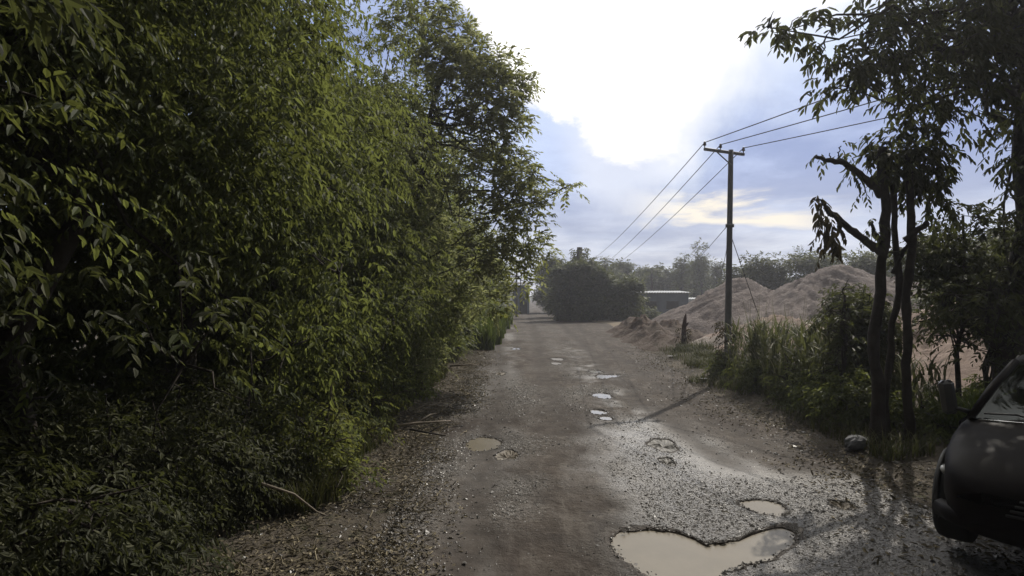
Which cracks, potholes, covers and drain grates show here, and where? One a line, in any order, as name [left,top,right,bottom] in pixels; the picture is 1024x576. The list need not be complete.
pothole [645,438,680,453]
pothole [596,522,807,576]
pothole [736,498,792,517]
pothole [463,436,505,452]
pothole [492,448,521,460]
pothole [657,457,676,467]
